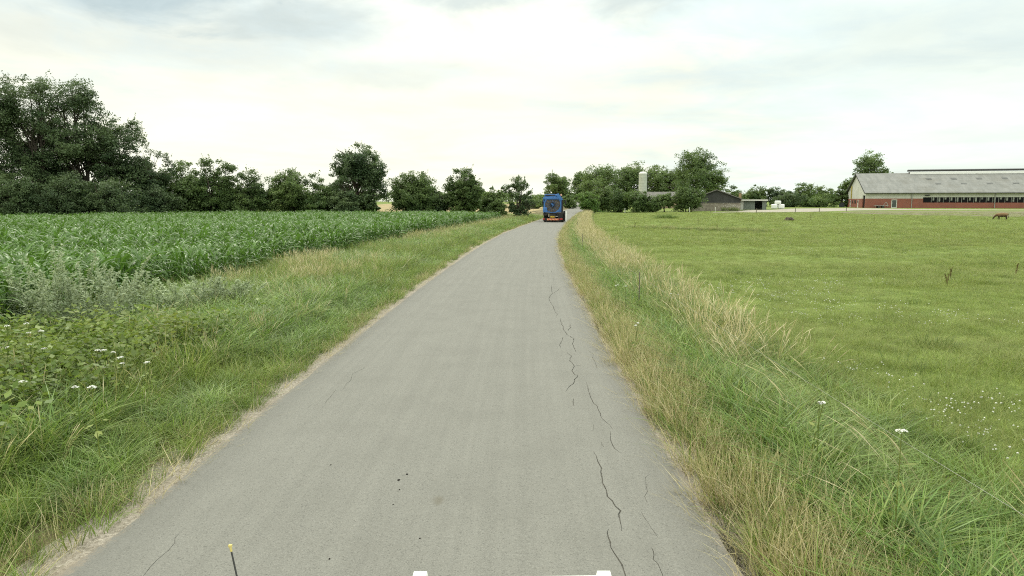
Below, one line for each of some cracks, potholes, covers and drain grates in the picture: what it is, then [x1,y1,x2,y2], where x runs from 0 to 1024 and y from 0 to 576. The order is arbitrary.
crack [549,271,663,576]
